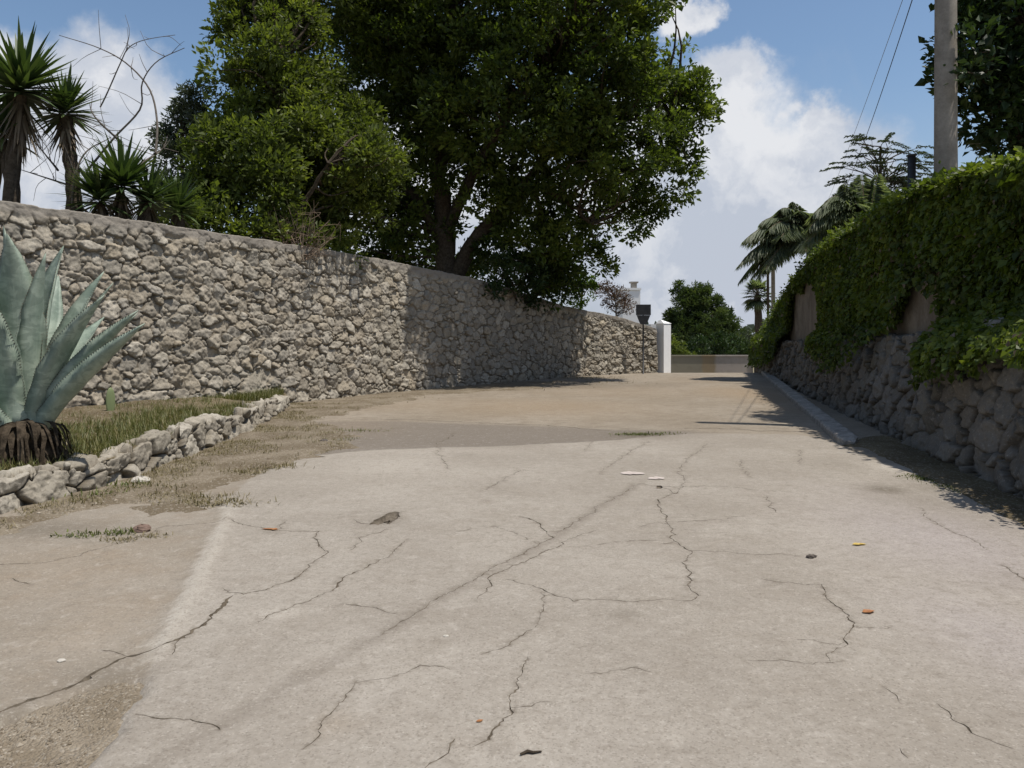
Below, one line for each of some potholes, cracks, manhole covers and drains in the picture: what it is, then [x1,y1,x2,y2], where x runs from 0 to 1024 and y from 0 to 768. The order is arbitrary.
crack [749,579,869,664]
crack [303,665,448,749]
crack [258,488,632,636]
crack [473,446,776,747]
crack [0,519,329,730]
crack [939,705,1011,748]
